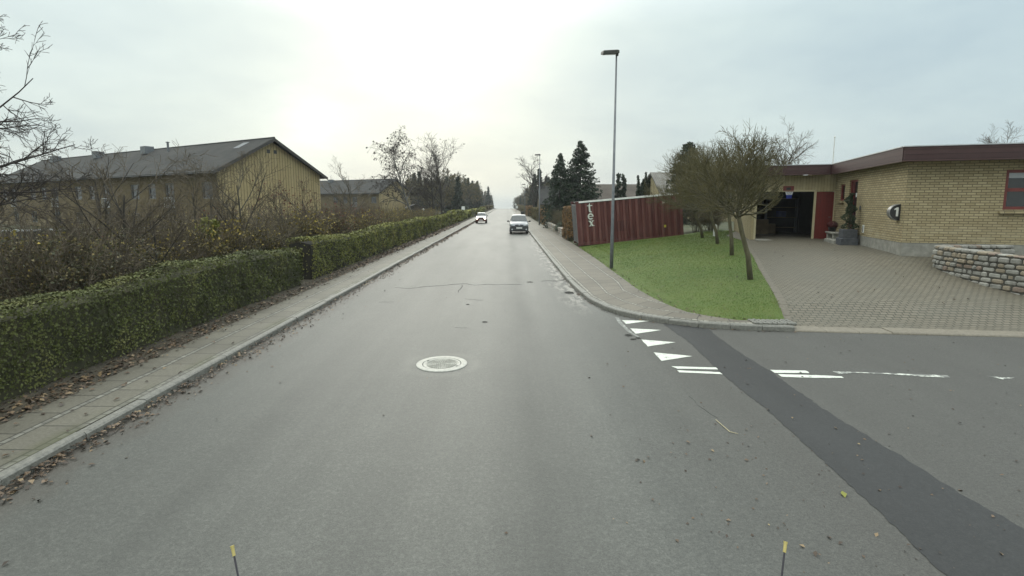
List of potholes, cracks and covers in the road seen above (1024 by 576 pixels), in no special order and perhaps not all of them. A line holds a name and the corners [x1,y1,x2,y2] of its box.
manhole cover [416,356,467,372]
